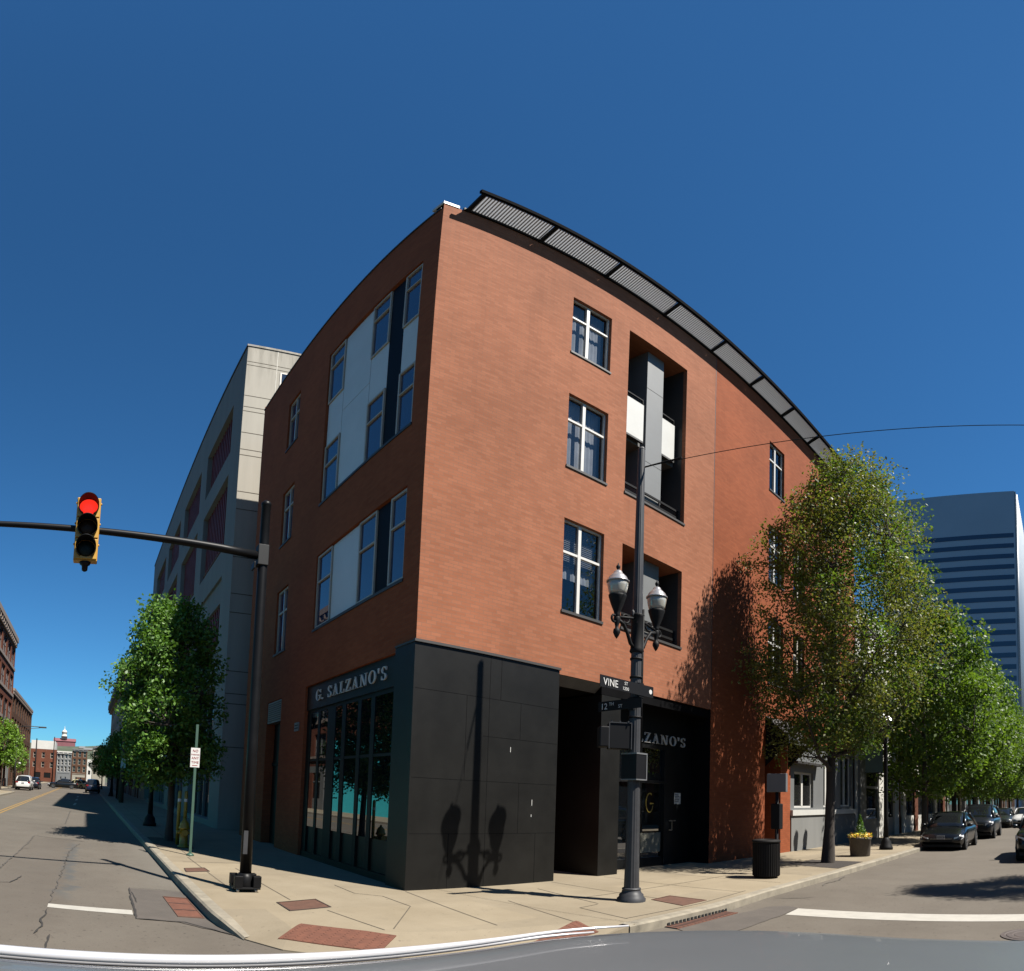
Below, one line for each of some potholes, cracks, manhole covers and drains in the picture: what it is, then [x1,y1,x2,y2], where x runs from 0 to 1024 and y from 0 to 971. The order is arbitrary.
drain grate [665,908,738,929]
manhole cover [1000,929,1024,941]
crack [34,909,50,948]
